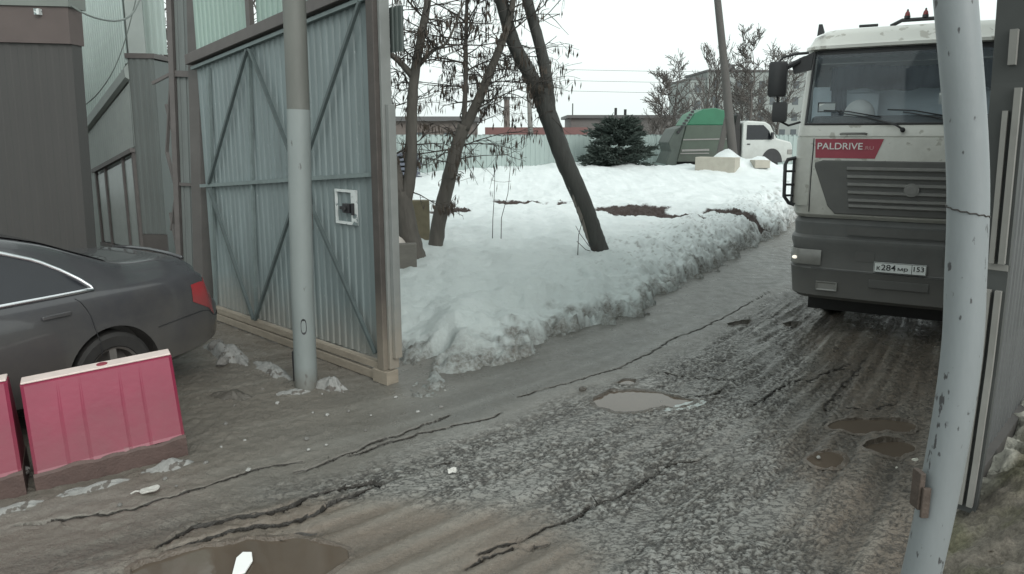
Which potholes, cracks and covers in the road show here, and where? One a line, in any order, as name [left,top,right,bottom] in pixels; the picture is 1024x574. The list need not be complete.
pothole [857,435,921,461]
pothole [124,533,356,574]
crack [51,413,500,550]
pothole [823,416,921,436]
crack [465,459,699,570]
crack [753,358,893,411]
pothole [801,448,850,470]
pothole [589,387,698,415]
crack [519,292,769,398]
pothole [614,378,640,387]
pothole [725,319,753,327]
